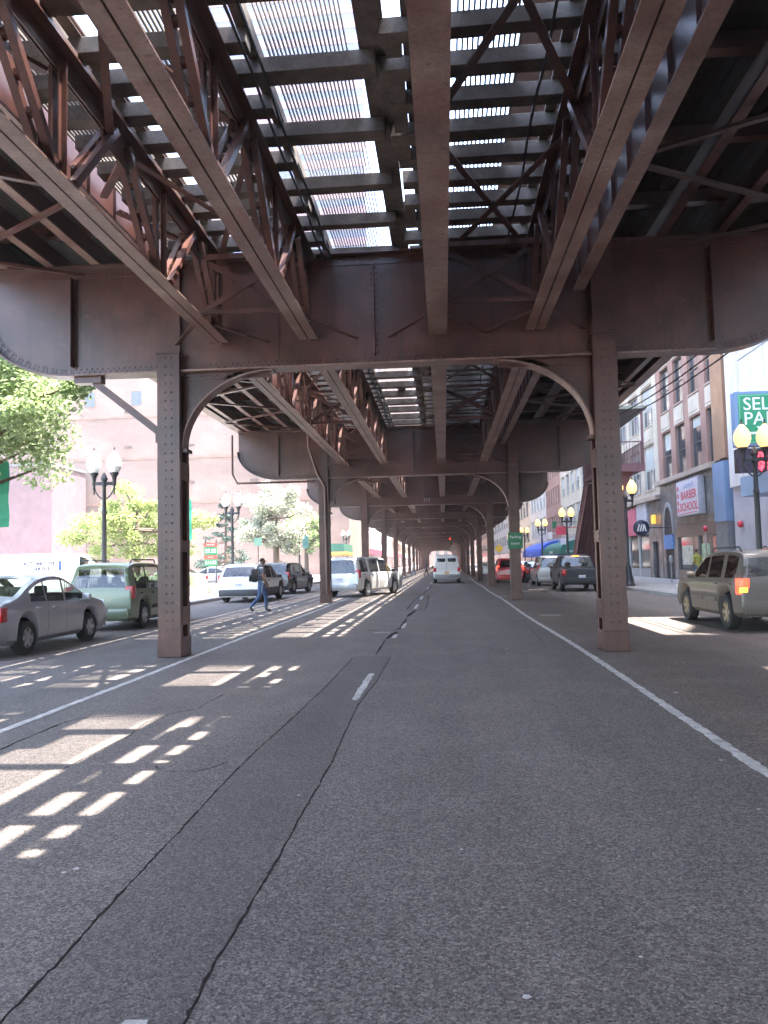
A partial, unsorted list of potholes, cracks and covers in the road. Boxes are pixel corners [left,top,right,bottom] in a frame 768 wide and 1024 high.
crack [0,585,432,1024]
